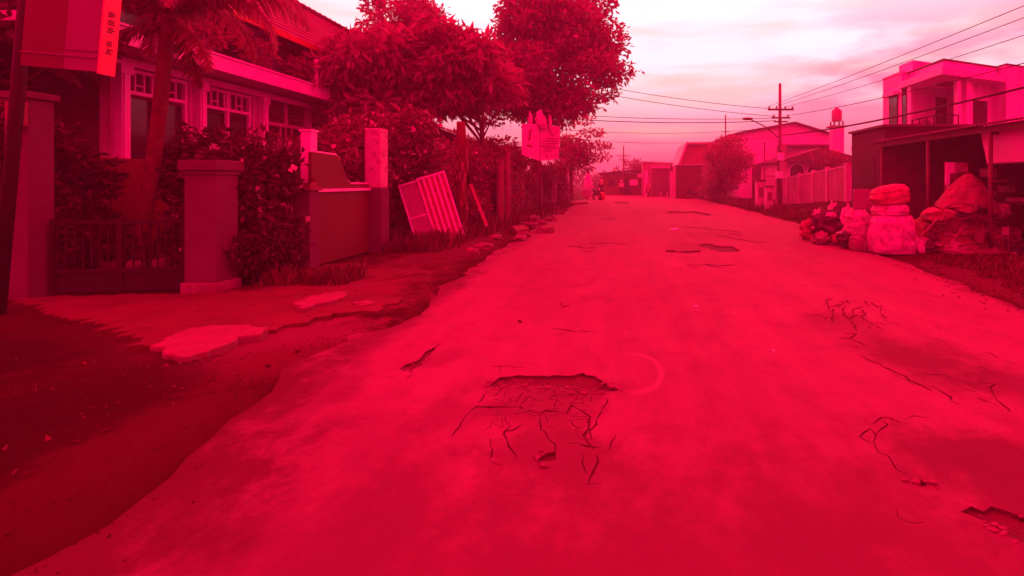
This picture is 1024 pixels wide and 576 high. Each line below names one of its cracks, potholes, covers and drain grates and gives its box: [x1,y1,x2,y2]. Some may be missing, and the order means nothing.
crack [815,299,898,345]
pothole [961,506,1024,544]
crack [452,366,617,484]
pothole [393,344,440,372]
pothole [484,373,623,396]
pothole [701,244,739,252]
crack [860,416,924,523]
crack [861,329,1010,412]
